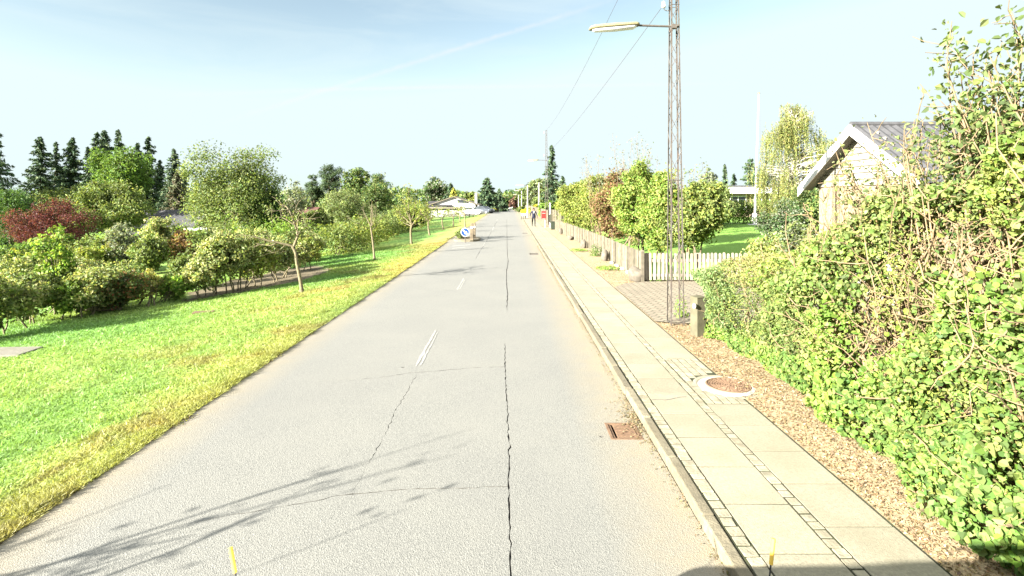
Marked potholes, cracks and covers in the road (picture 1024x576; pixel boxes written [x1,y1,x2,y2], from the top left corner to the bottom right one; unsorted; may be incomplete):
manhole cover [693,375,759,399]
drain grate [604,423,644,440]
crack [163,346,512,576]
